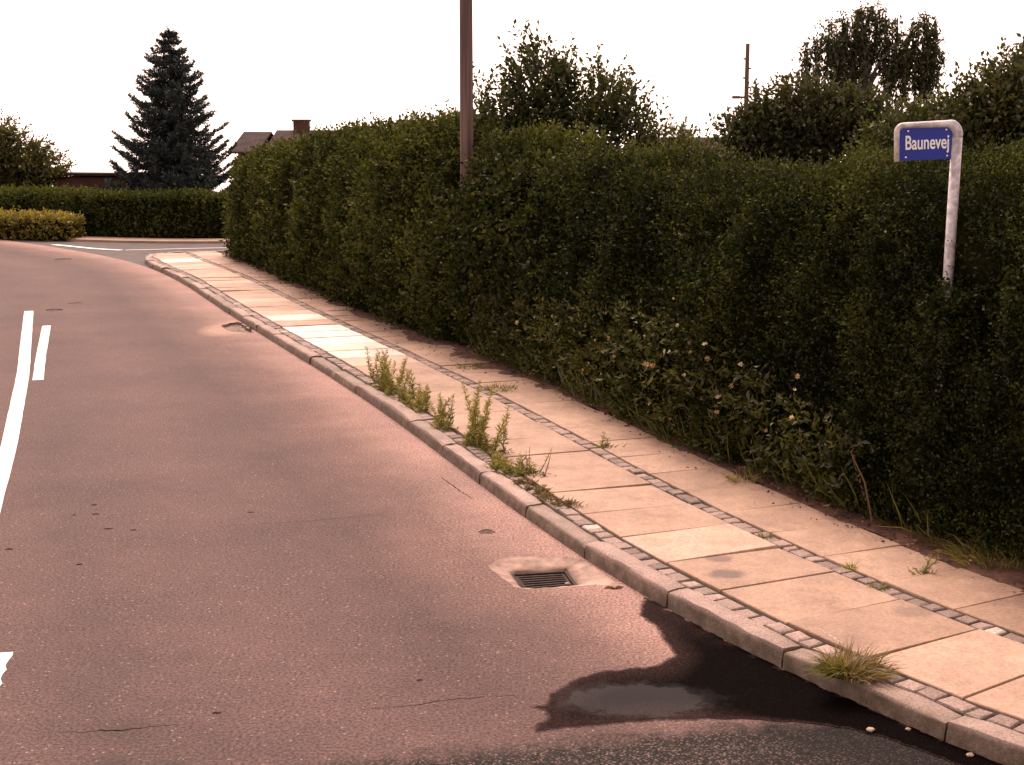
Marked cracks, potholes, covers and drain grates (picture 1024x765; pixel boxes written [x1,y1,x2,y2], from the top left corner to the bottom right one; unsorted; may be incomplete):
crack [63,724,176,733]
crack [363,695,514,710]
